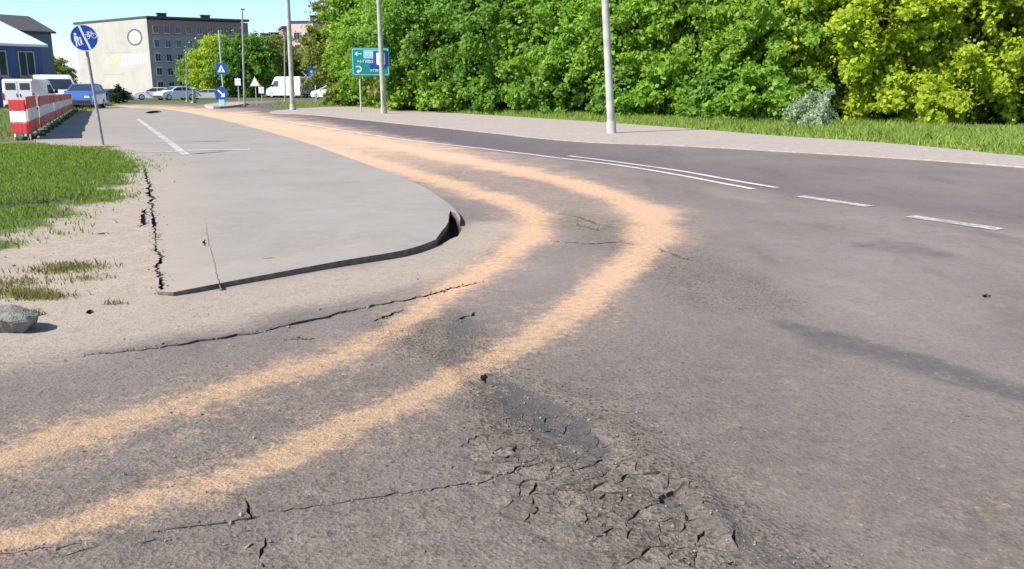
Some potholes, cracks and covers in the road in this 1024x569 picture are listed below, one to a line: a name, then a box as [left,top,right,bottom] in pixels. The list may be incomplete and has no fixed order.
crack [0,413,740,569]
crack [660,249,699,262]
crack [89,283,476,355]
crack [554,215,635,245]
crack [98,166,165,290]
